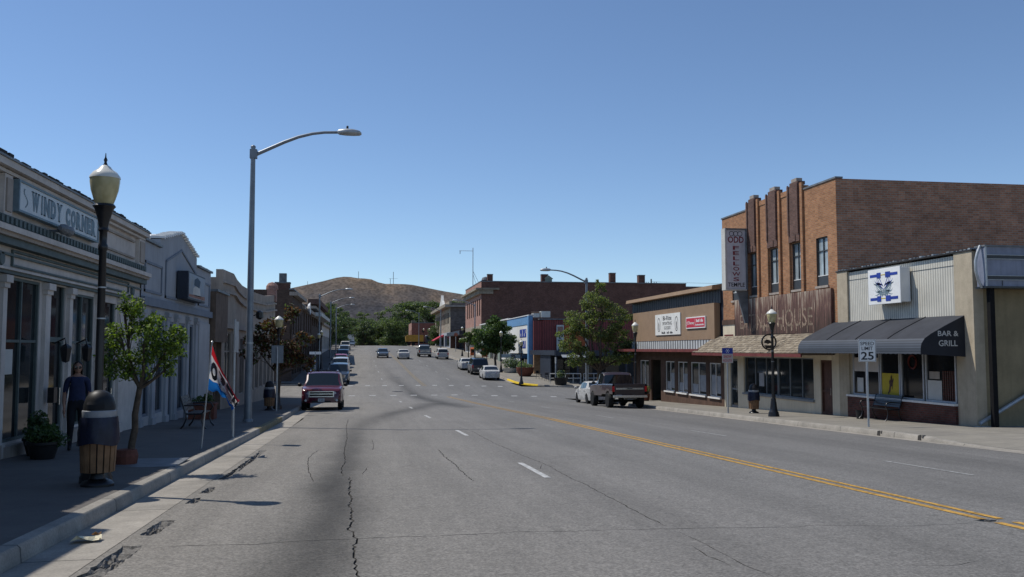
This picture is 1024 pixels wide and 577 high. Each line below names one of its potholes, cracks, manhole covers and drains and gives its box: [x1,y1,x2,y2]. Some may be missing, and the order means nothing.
pothole [140,520,175,536]
pothole [77,545,143,577]
pothole [218,450,266,480]
